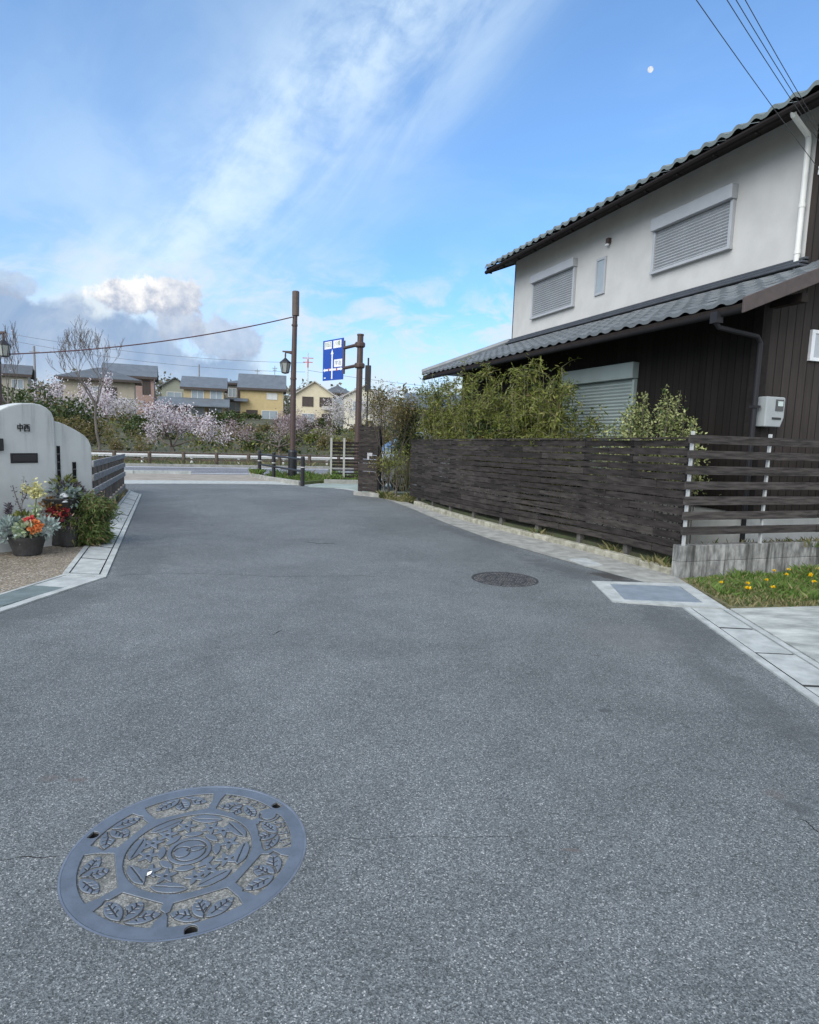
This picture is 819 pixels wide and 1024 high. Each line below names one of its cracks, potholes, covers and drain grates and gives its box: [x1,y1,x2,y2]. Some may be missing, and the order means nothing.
crack [0,851,61,861]
manhole cover [471,572,539,587]
manhole cover [57,786,306,943]
